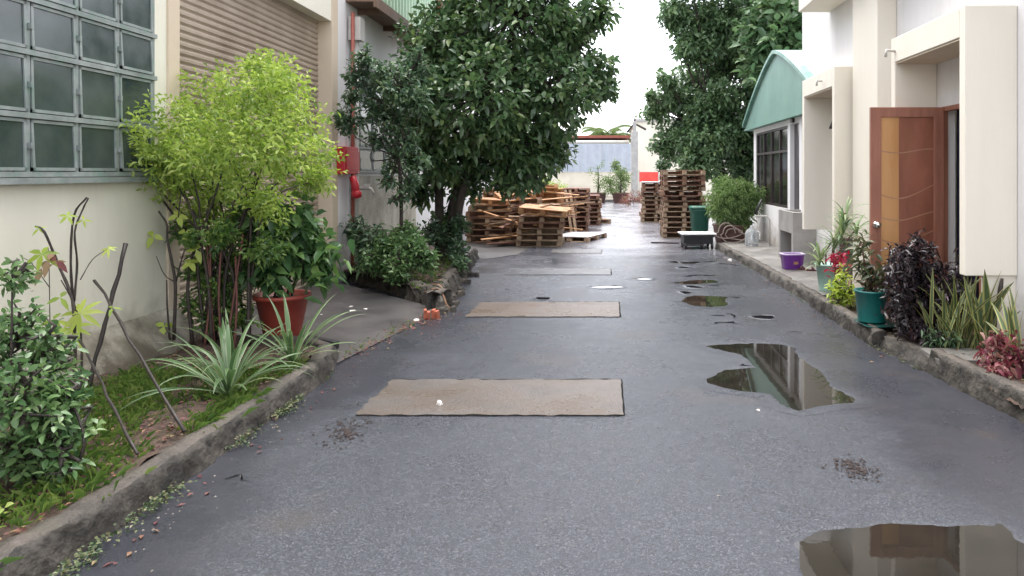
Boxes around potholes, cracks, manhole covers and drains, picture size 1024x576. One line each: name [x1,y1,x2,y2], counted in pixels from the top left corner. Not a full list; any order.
pothole [689,340,875,416]
pothole [672,294,739,309]
pothole [765,510,1024,576]
